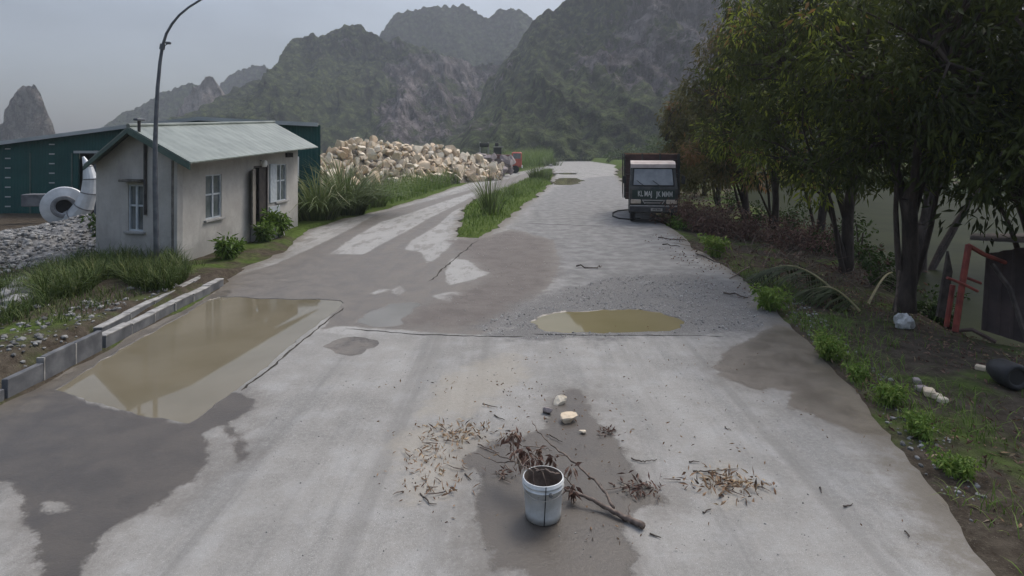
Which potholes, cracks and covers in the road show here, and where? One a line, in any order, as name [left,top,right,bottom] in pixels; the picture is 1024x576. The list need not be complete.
crack [429,241,477,281]
pothole [529,309,685,333]
pothole [56,297,344,424]
